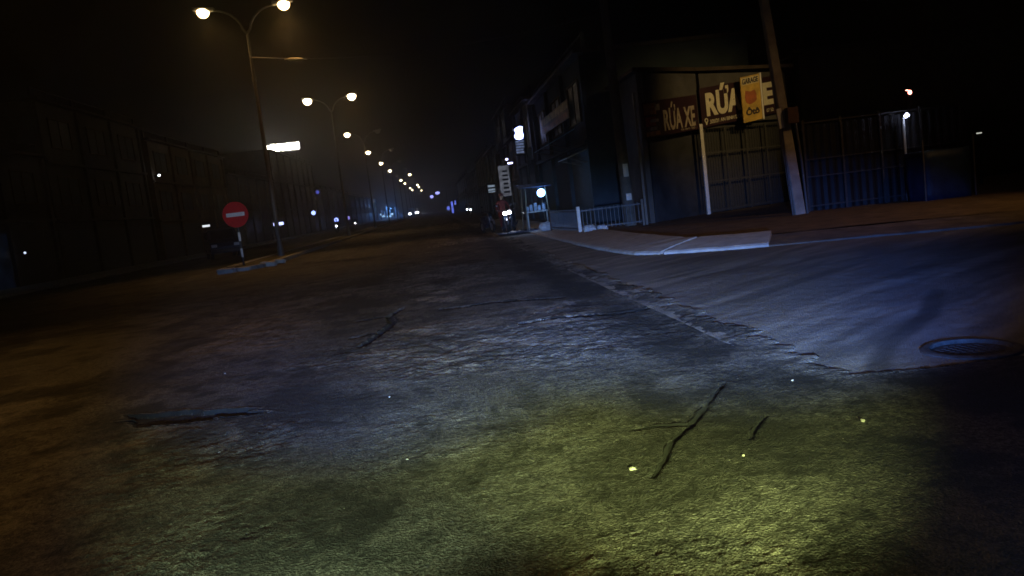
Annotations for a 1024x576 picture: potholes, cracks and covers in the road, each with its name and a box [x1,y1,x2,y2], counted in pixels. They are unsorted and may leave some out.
crack [458,298,657,322]
manhole cover [920,338,1024,361]
crack [359,310,402,347]
crack [751,418,766,440]
crack [636,384,724,478]
